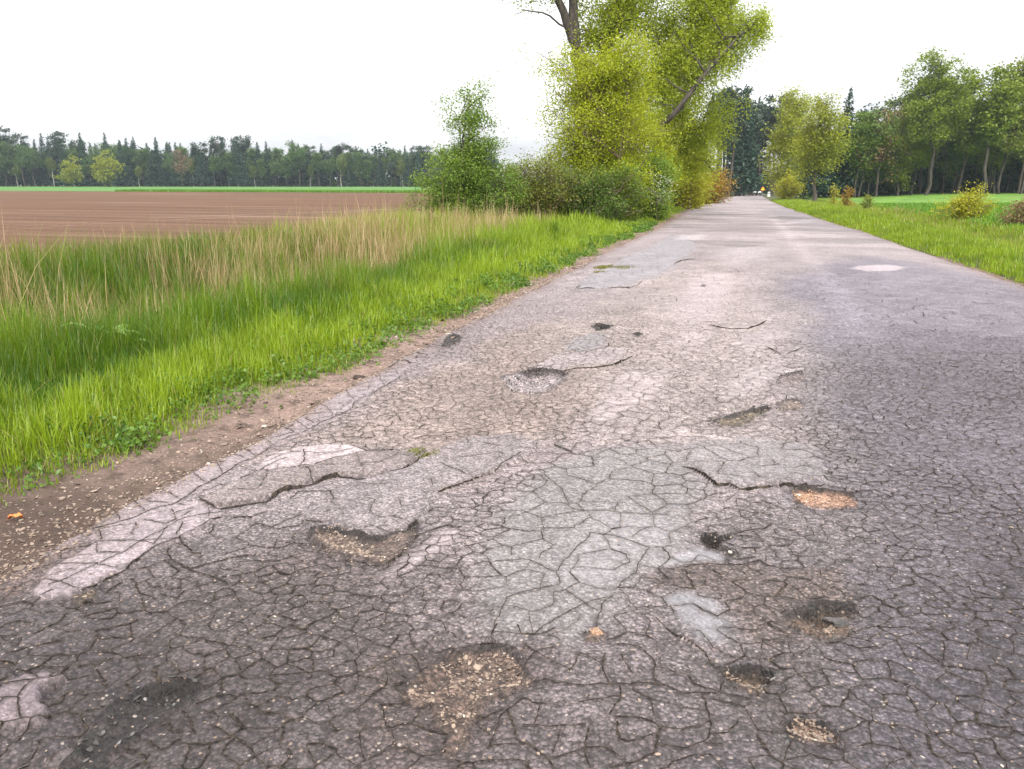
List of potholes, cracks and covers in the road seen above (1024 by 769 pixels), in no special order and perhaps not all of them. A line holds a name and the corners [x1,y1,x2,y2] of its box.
crack [0,231,1023,769]
pothole [591,323,614,331]
pothole [777,599,862,645]
pothole [708,404,777,428]
pothole [499,367,568,395]
pothole [771,714,846,749]
pothole [696,530,743,560]
pothole [703,660,782,696]
pothole [788,482,859,511]
pothole [399,642,540,757]
pothole [440,333,463,348]
